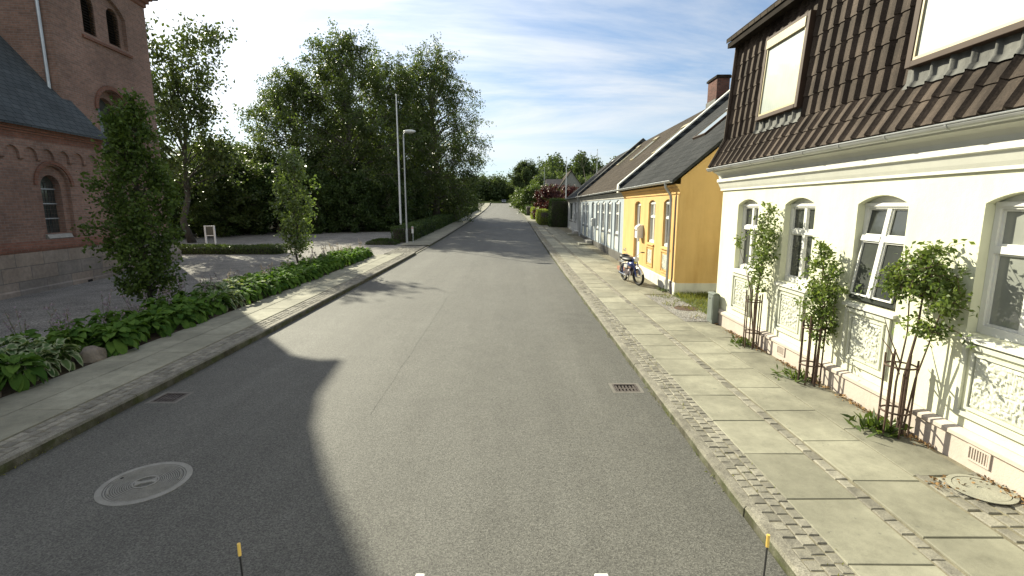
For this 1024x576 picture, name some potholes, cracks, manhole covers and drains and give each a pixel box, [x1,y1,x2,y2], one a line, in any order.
manhole cover [94,462,193,506]
drain grate [146,392,194,403]
manhole cover [945,474,1020,505]
drain grate [608,383,644,393]
